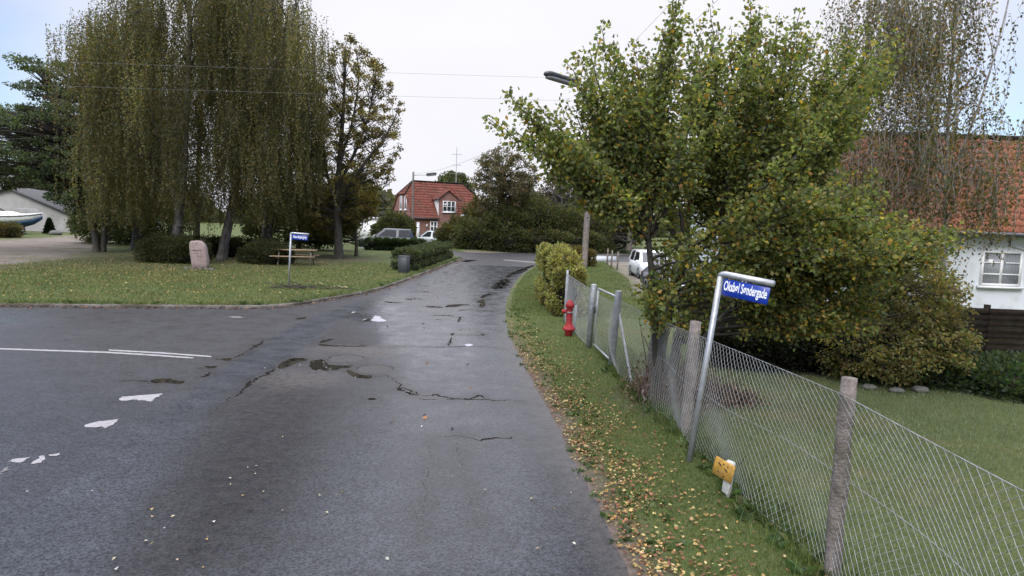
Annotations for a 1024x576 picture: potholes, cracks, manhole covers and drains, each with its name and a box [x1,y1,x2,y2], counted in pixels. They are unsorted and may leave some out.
pothole [309,359,353,372]
crack [384,260,534,322]
manhole cover [327,354,366,362]
crack [375,375,527,401]
manhole cover [354,364,395,377]
crack [416,435,513,526]
crack [318,338,365,347]
pothole [277,358,308,369]
